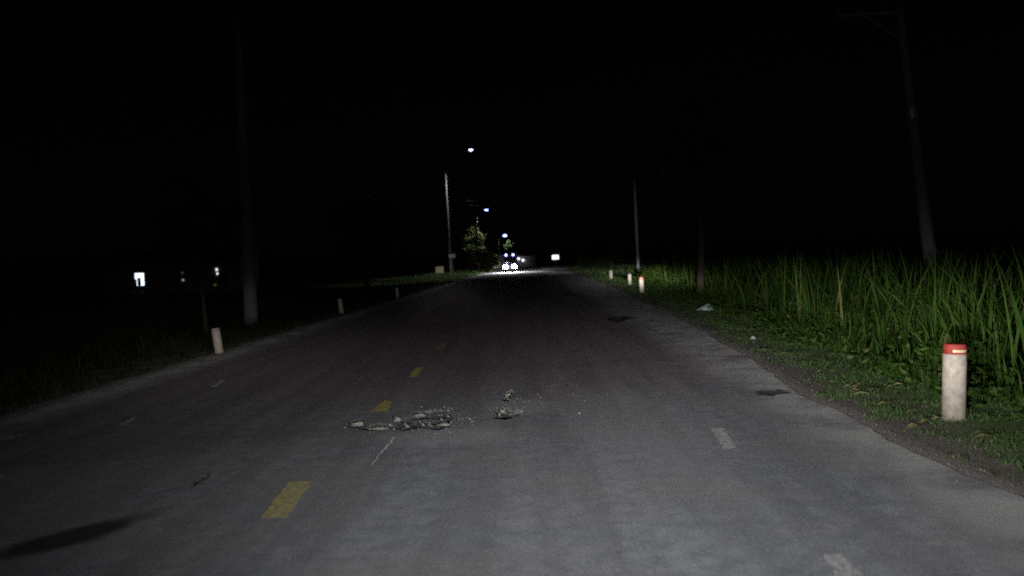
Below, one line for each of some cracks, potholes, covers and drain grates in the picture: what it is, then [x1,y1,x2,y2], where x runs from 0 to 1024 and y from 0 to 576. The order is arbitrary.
pothole [492,407,524,420]
pothole [345,409,455,431]
